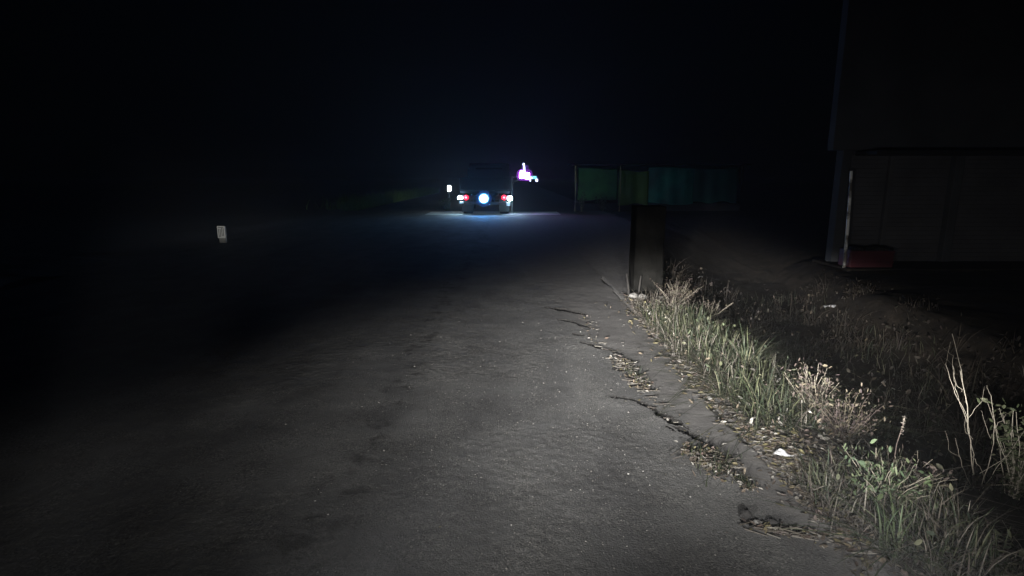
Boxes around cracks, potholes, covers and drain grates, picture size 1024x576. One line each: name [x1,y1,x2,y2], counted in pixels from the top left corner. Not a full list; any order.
crack [544,307,720,450]
